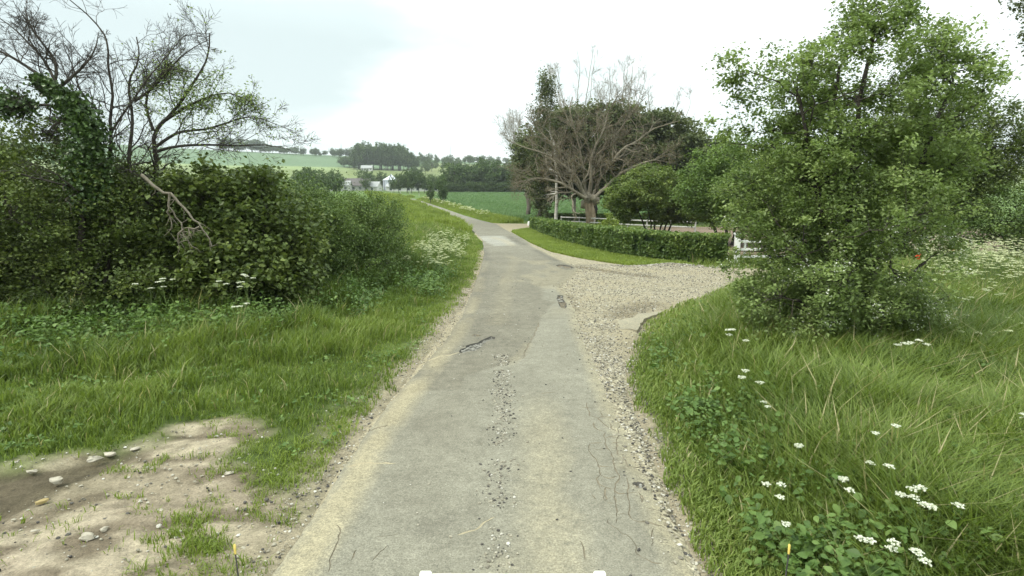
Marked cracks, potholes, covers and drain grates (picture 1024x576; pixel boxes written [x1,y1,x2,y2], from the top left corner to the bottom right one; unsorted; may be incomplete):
crack [541,392,662,564]
crack [328,525,398,572]
